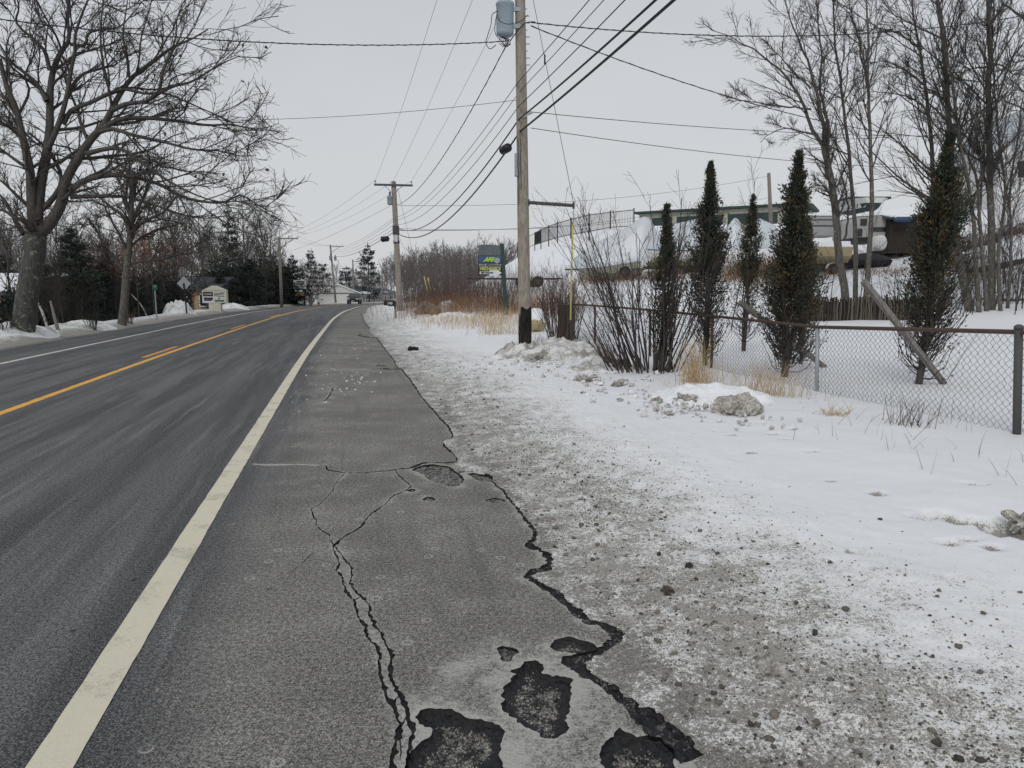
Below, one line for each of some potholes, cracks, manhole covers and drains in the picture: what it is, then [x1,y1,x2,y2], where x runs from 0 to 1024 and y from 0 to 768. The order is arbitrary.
pothole [406,708,505,768]
pothole [550,636,597,655]
pothole [497,646,519,662]
pothole [500,660,573,739]
crack [260,314,705,768]
pothole [412,464,464,486]
pothole [599,728,675,768]
